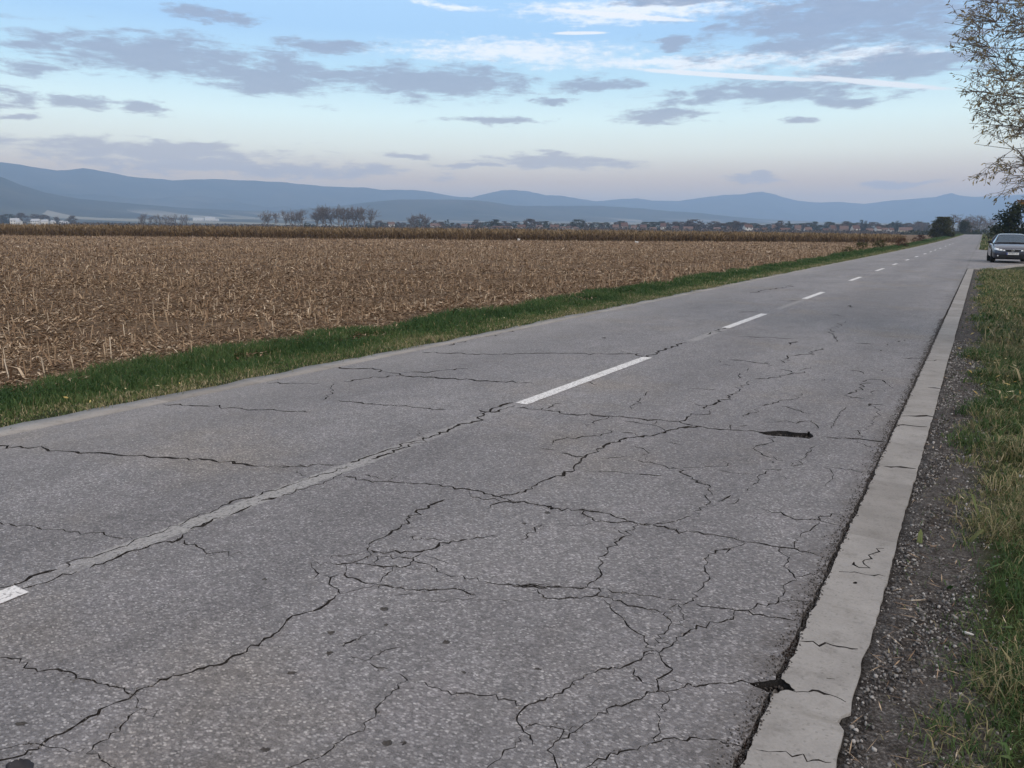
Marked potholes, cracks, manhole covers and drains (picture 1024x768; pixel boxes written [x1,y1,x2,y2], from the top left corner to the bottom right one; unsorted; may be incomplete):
pothole [749,680,794,699]
crack [735,270,967,768]
pothole [765,431,814,439]
crack [0,305,893,768]
